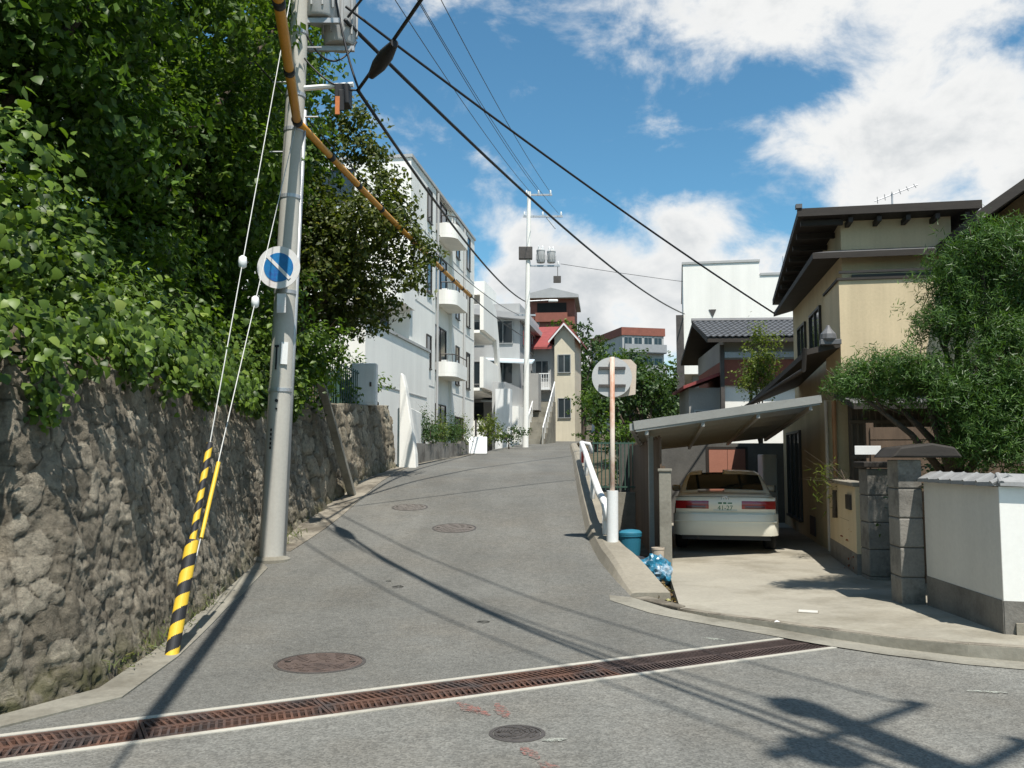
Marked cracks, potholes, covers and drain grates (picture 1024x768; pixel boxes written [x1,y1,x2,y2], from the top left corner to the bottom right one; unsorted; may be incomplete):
manhole cover [273,652,366,674]
manhole cover [489,725,546,743]
manhole cover [432,523,476,533]
